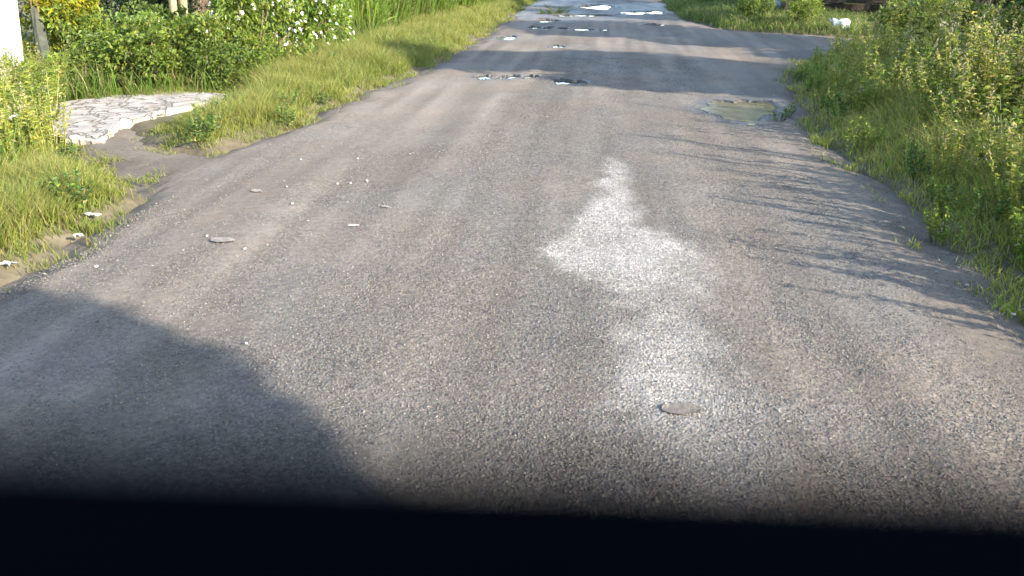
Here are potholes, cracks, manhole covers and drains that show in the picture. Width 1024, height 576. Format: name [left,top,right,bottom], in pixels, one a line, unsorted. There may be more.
pothole [695,99,784,123]
